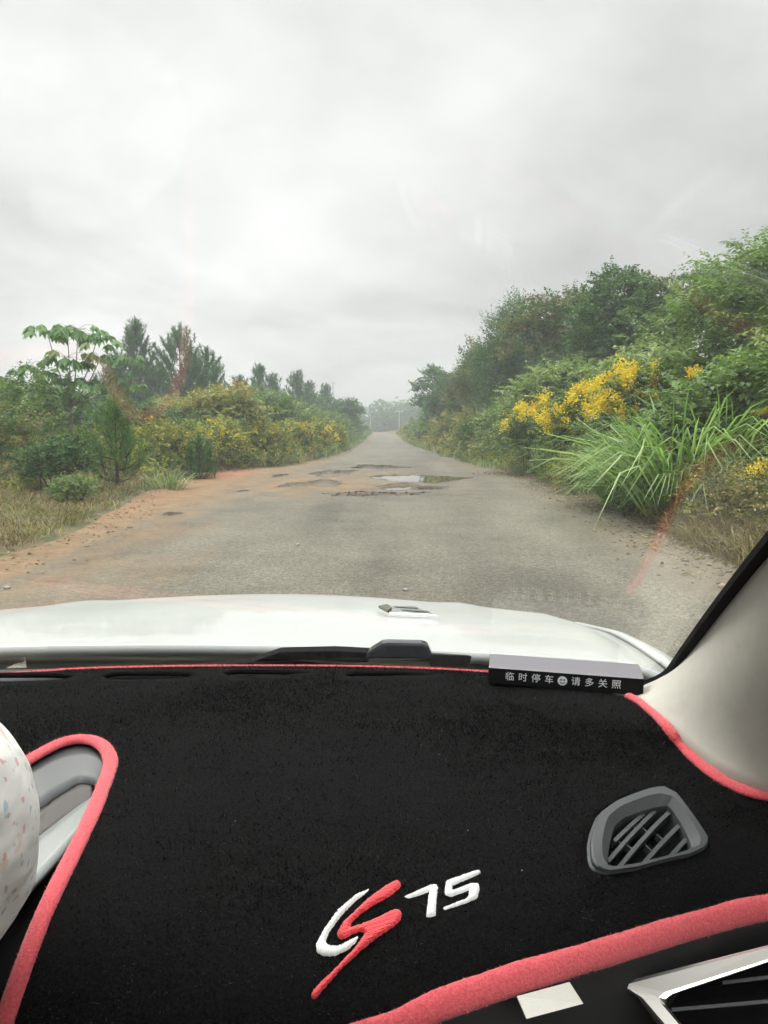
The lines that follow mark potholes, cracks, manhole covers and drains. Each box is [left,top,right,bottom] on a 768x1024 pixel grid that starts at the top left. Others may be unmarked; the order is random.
pothole [275,479,347,488]
pothole [368,474,476,484]
pothole [308,470,361,478]
